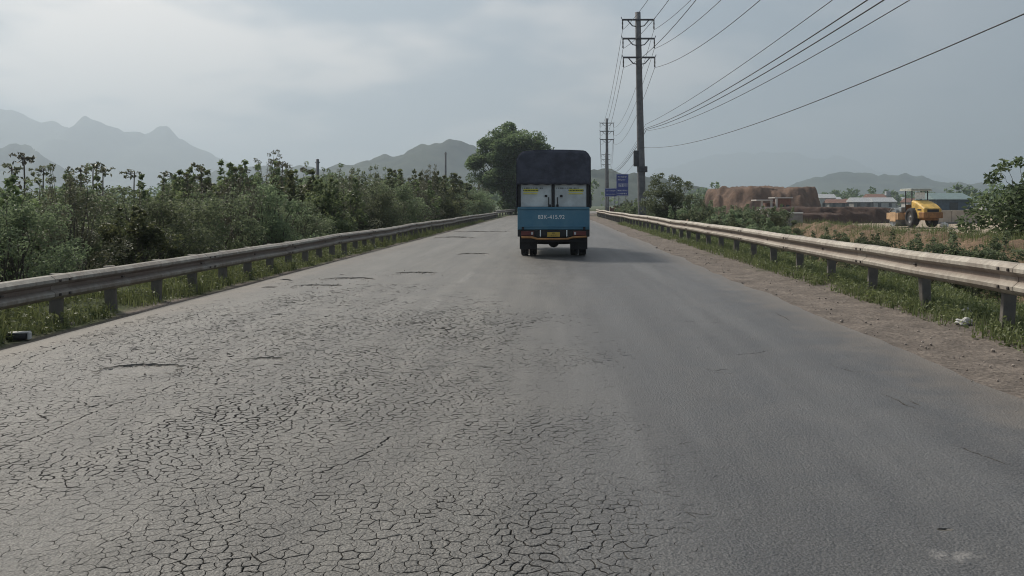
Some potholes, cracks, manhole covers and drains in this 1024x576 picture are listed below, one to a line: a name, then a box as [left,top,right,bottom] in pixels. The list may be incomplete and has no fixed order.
crack [0,272,764,576]
